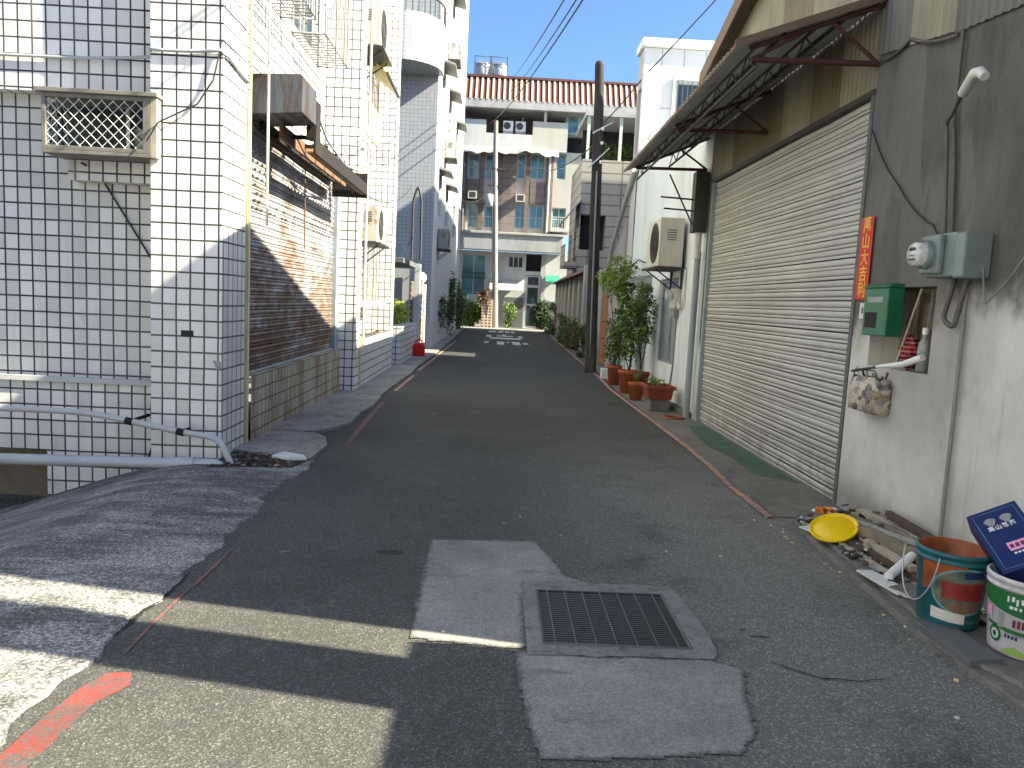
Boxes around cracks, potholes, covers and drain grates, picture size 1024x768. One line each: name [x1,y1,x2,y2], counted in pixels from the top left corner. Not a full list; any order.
drain grate [535,589,693,650]
crack [771,661,886,681]
